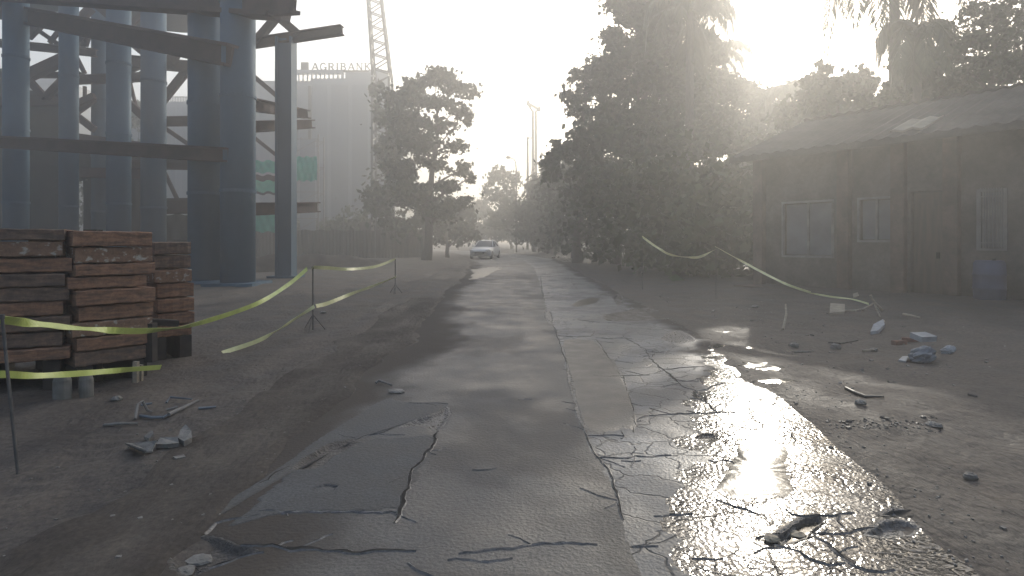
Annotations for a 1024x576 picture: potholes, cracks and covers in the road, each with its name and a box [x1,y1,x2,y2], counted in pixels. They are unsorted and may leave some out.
pothole [778,516,825,545]
pothole [864,519,921,539]
crack [195,307,736,576]
crack [716,499,756,514]
crack [754,508,896,574]
